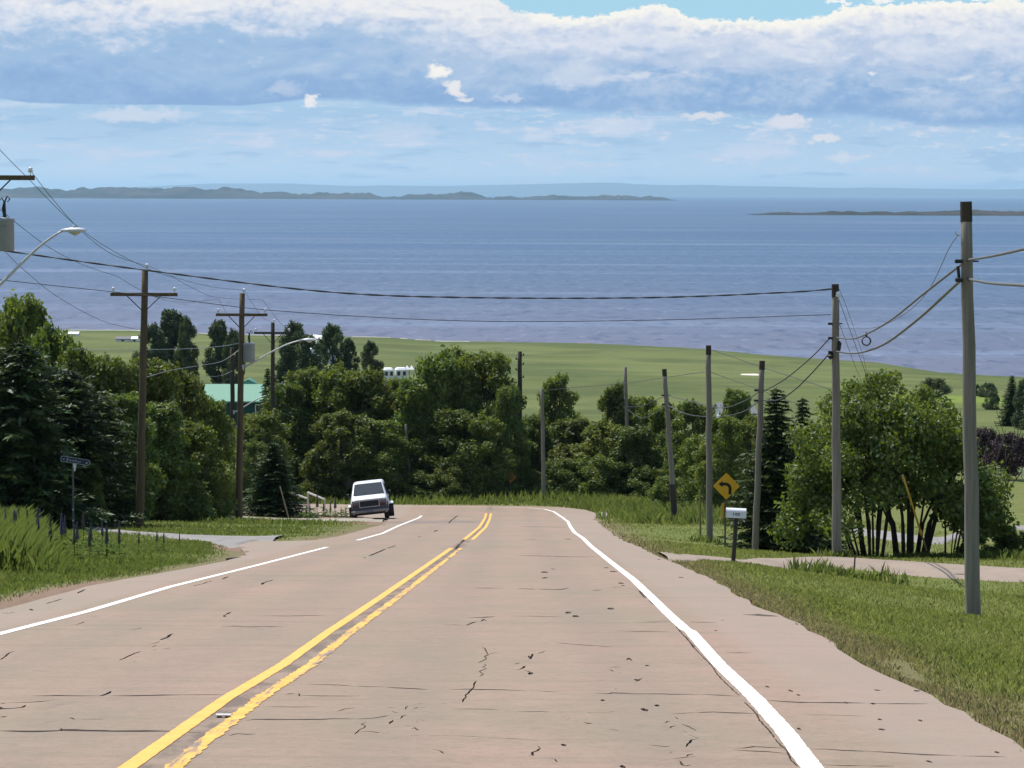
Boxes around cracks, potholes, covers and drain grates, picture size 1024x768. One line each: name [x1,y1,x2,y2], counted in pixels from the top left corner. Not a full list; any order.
crack [229,642,911,766]
crack [120,628,174,662]
crack [0,692,225,733]
